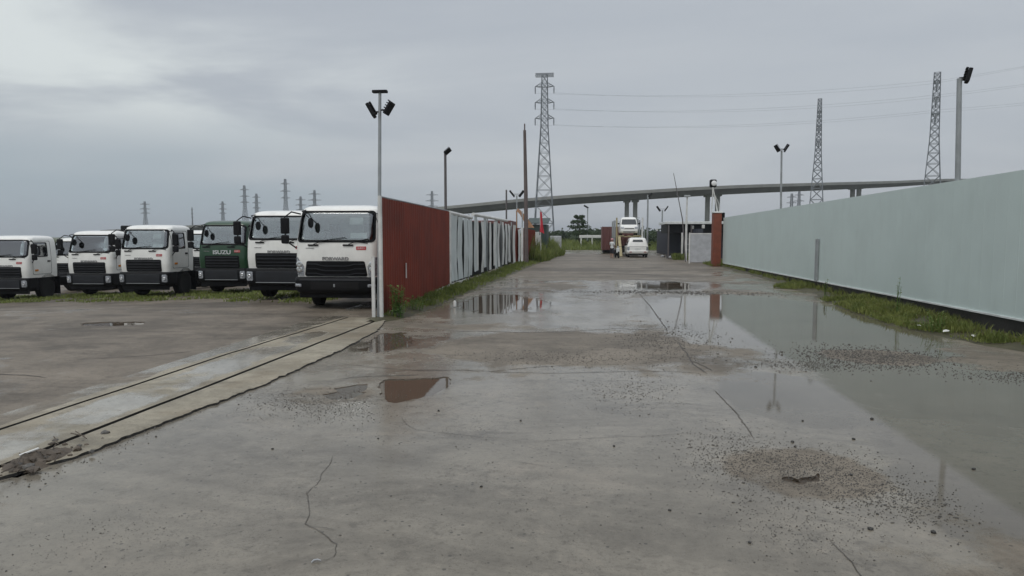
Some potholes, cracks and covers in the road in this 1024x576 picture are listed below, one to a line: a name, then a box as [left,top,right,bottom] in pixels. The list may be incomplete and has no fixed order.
crack [300,459,337,562]
pothole [378,377,451,403]
